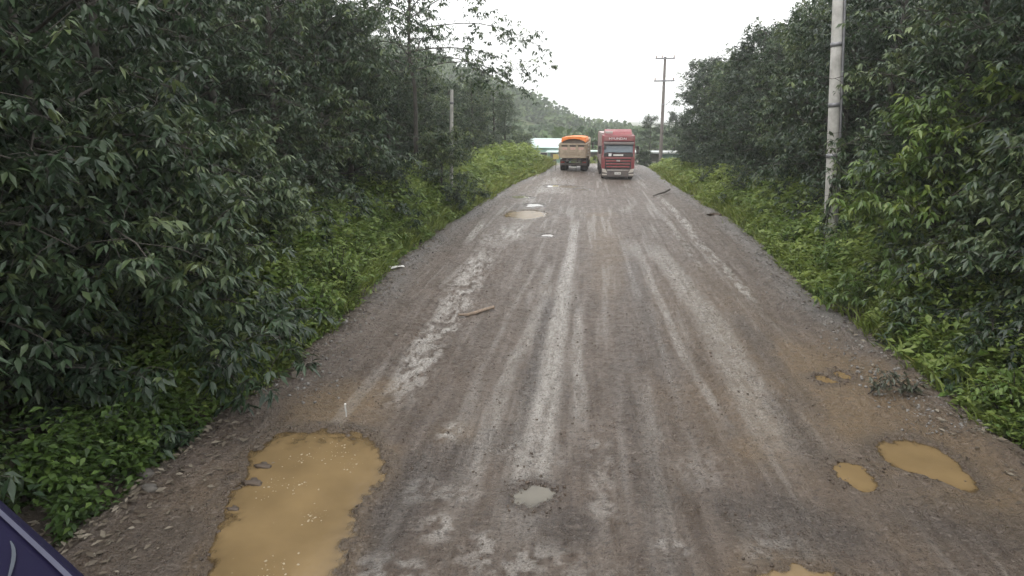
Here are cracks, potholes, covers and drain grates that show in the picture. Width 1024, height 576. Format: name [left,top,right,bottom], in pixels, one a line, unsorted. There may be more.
pothole [824,367,861,383]
pothole [500,209,551,220]
pothole [820,455,894,500]
pothole [733,552,867,576]
pothole [862,432,995,501]
pothole [188,421,398,576]
pothole [498,476,568,520]
pothole [806,372,849,387]
